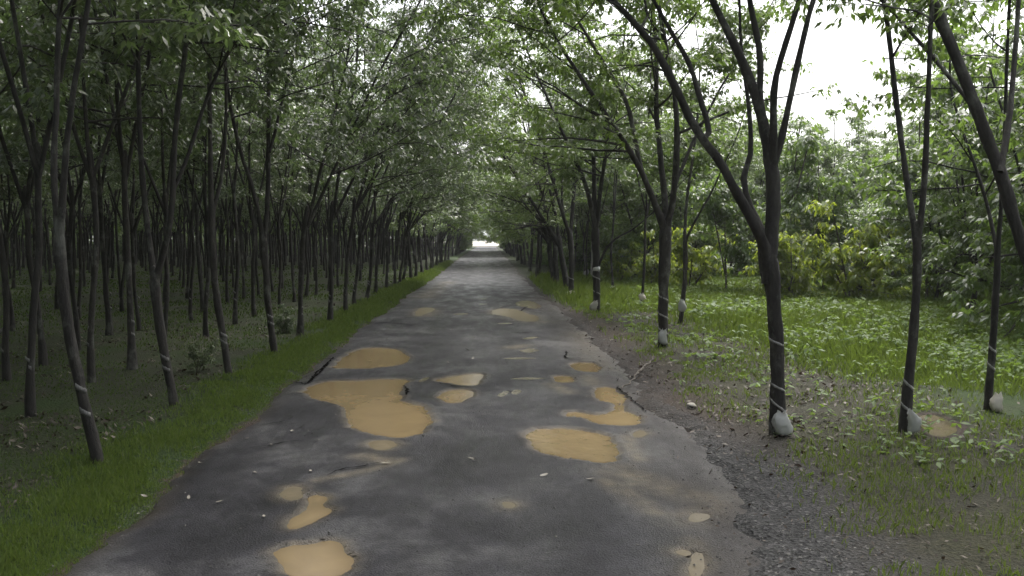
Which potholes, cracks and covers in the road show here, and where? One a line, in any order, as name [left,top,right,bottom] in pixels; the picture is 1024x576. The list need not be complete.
crack [296,357,334,384]
pothole [259,534,368,576]
pothole [674,548,719,576]
pothole [410,307,439,317]
pothole [428,371,492,387]
pothole [564,361,608,373]
pothole [555,385,653,427]
pothole [430,387,480,404]
pothole [293,377,445,439]
pothole [487,308,544,322]
pothole [513,424,633,465]
pothole [325,346,417,370]
